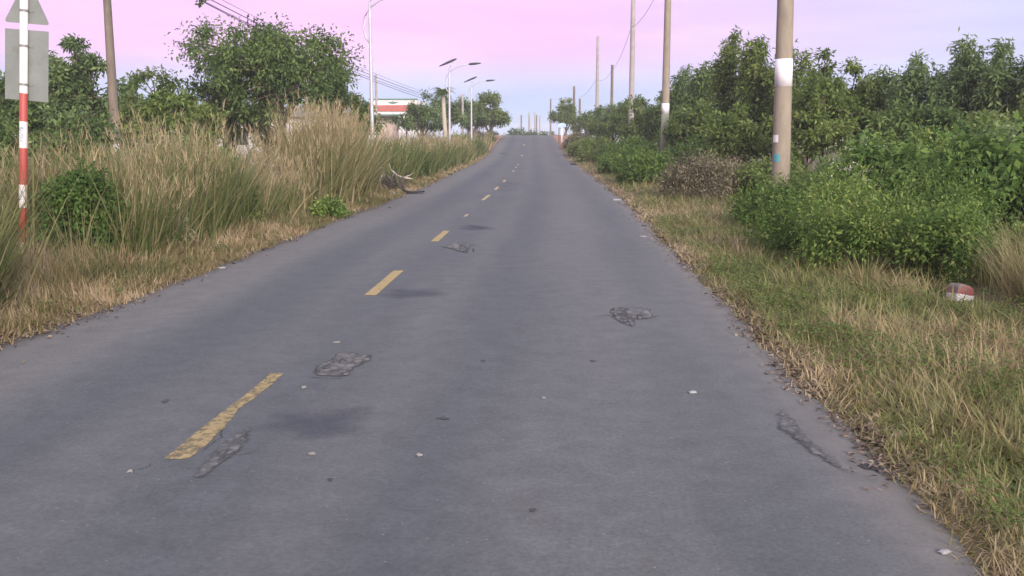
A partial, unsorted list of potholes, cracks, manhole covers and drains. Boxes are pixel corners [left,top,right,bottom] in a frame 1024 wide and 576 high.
pothole [614,307,652,326]
pothole [194,430,250,477]
pothole [445,243,469,253]
pothole [314,352,372,376]
pothole [777,411,843,469]
